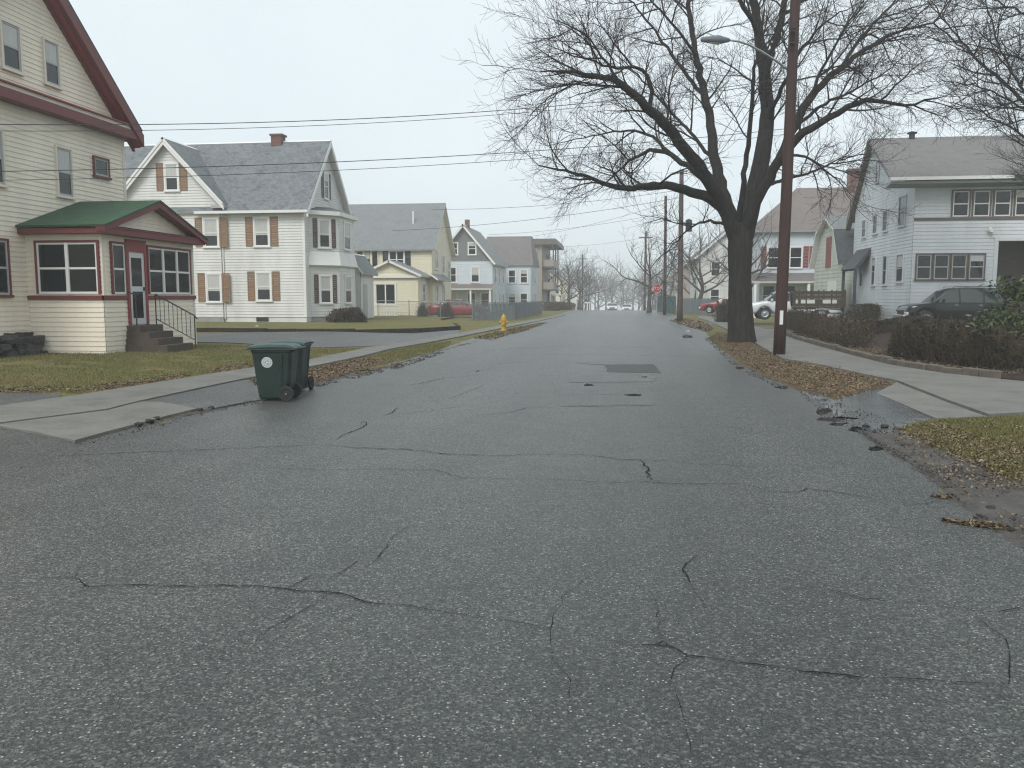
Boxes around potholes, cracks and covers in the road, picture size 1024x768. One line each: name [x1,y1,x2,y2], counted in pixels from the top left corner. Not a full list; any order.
crack [2,525,537,636]
crack [544,575,593,716]
crack [608,579,1023,760]
crack [82,443,938,503]
